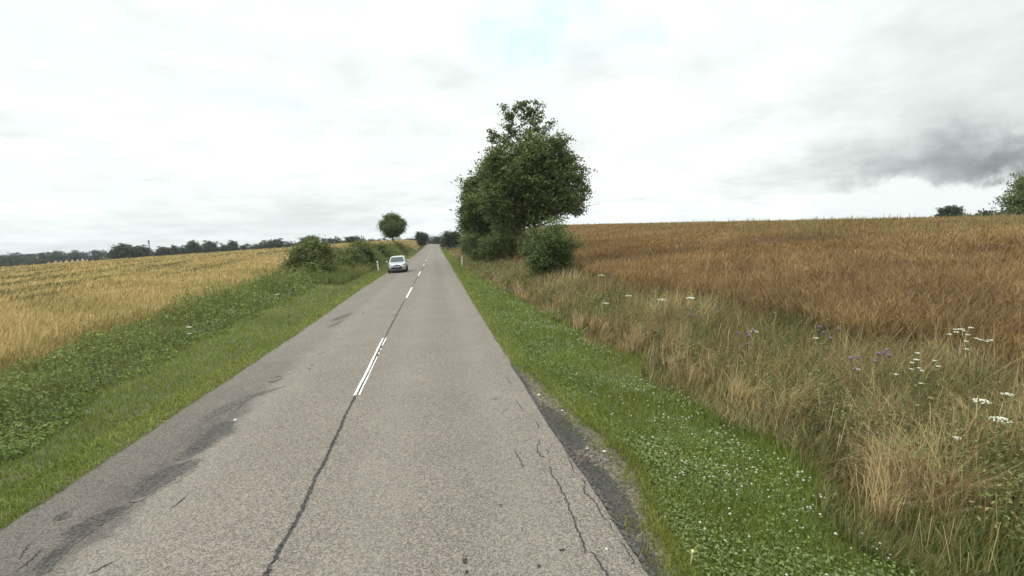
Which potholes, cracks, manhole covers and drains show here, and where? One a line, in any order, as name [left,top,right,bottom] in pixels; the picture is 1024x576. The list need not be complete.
crack [502,402,634,576]
